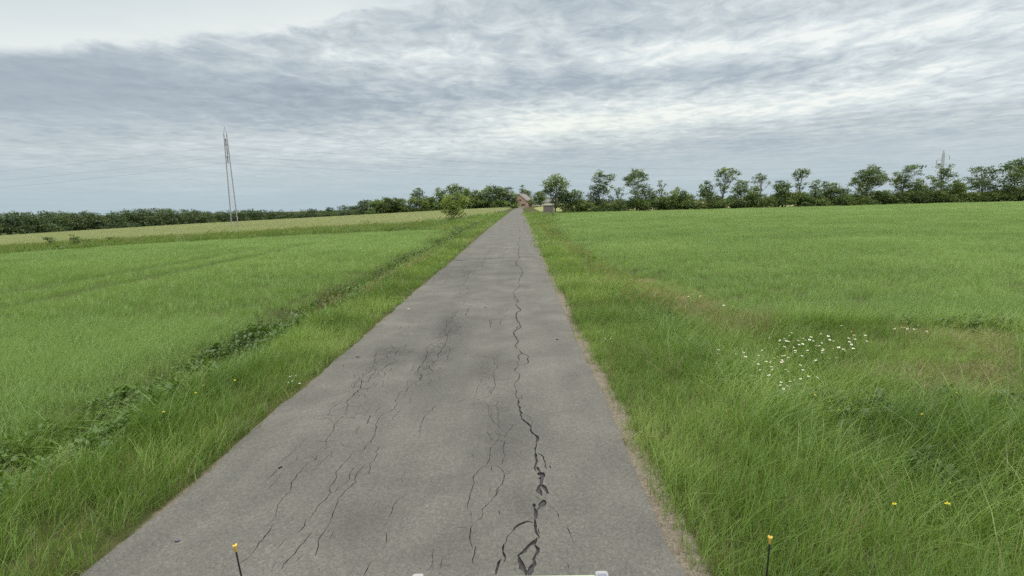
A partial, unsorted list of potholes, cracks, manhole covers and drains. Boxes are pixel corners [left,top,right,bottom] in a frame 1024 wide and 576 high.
crack [240,345,434,572]
crack [411,227,573,576]
